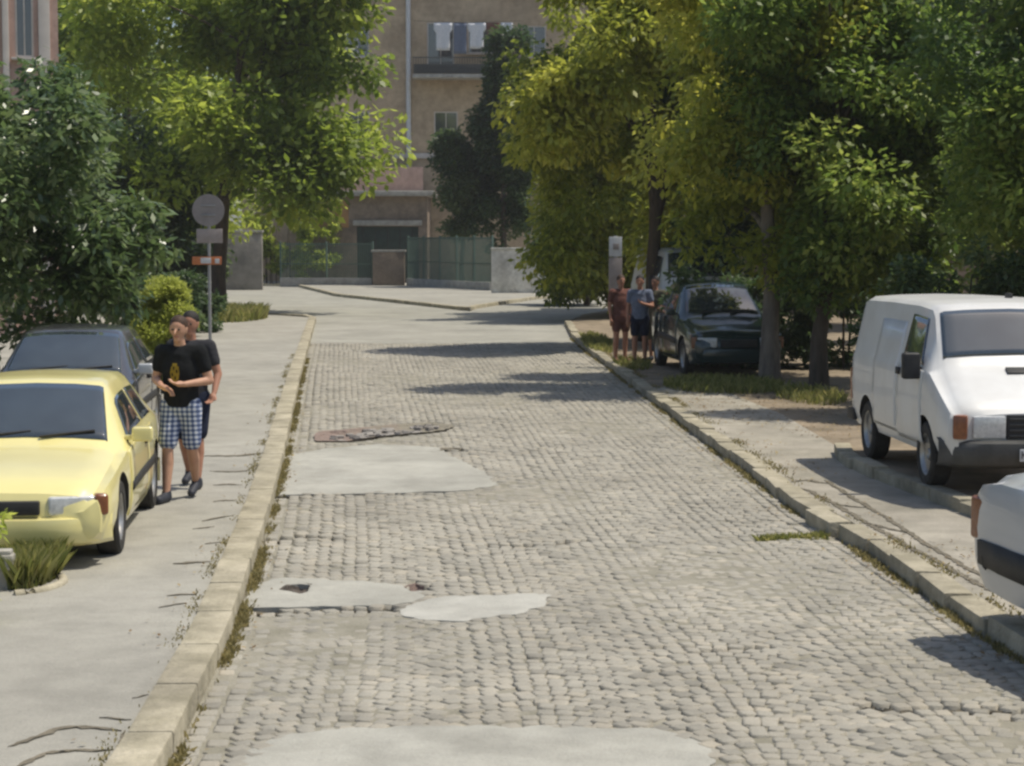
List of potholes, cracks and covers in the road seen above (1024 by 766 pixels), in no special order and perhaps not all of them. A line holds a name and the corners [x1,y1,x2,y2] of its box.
crack [9,717,131,766]
crack [193,484,238,544]
pothole [279,583,312,594]
crack [159,593,195,608]
